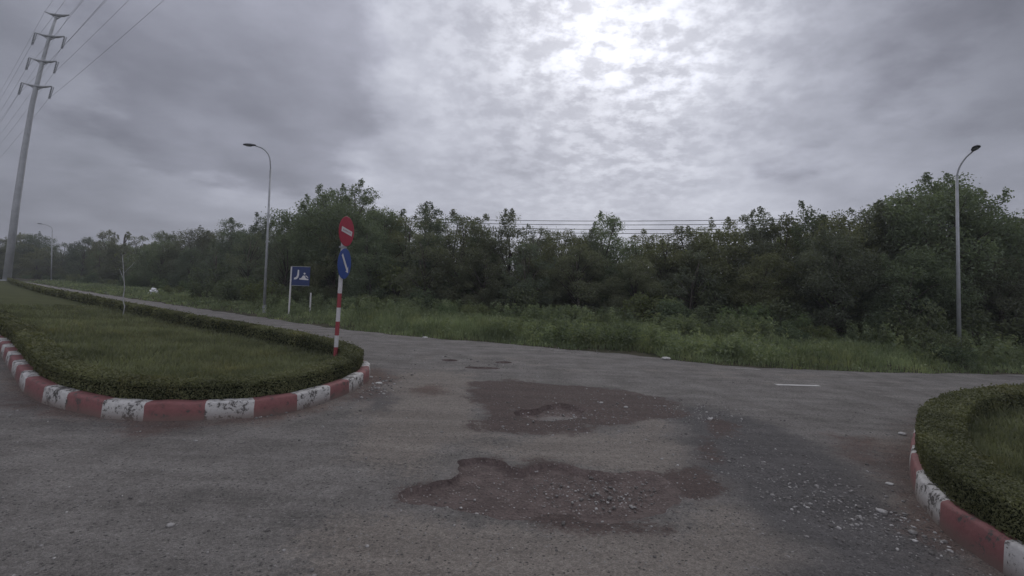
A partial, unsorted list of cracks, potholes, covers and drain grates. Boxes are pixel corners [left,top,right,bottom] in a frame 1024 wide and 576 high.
pothole [397,458,682,524]
pothole [514,403,588,421]
